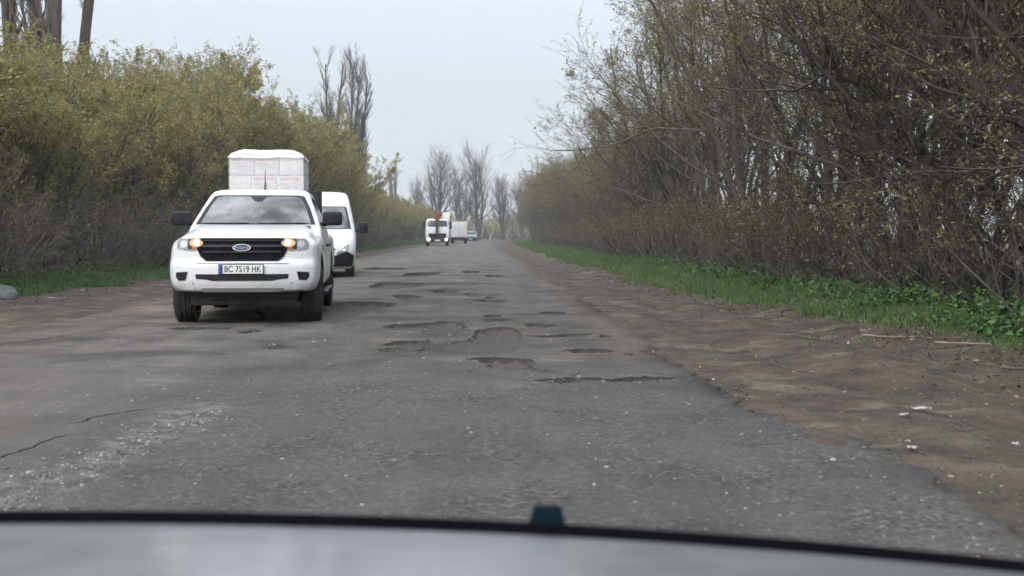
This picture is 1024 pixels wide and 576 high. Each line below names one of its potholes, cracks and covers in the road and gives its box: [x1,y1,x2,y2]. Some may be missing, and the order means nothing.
pothole [323,302,396,312]
pothole [369,282,437,290]
pothole [465,357,563,374]
crack [1,402,156,458]
pothole [438,327,524,353]
pothole [382,321,468,334]
